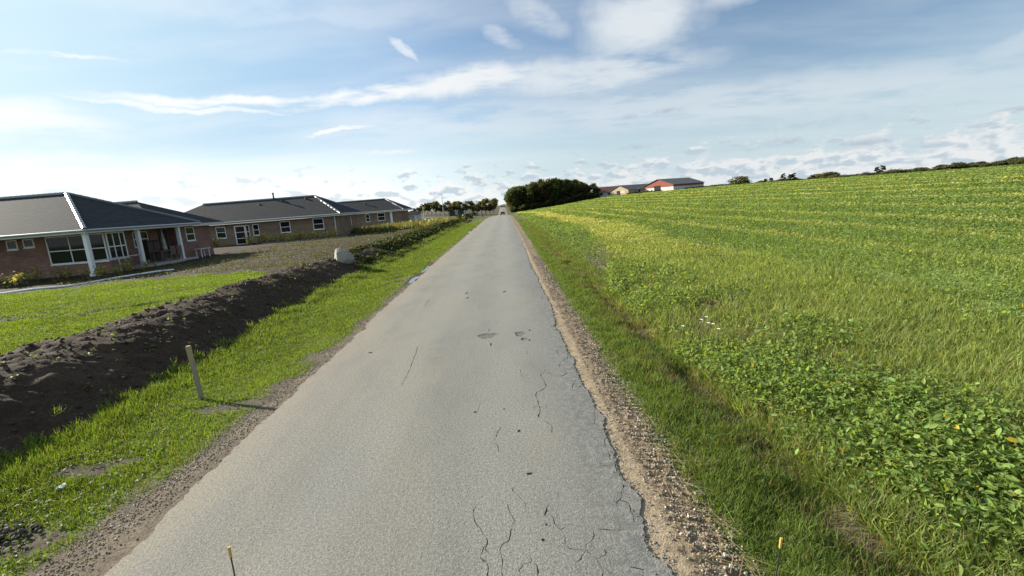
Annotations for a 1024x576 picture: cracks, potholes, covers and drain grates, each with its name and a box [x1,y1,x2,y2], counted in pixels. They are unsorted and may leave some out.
crack [473,488,539,576]
crack [520,351,644,576]
